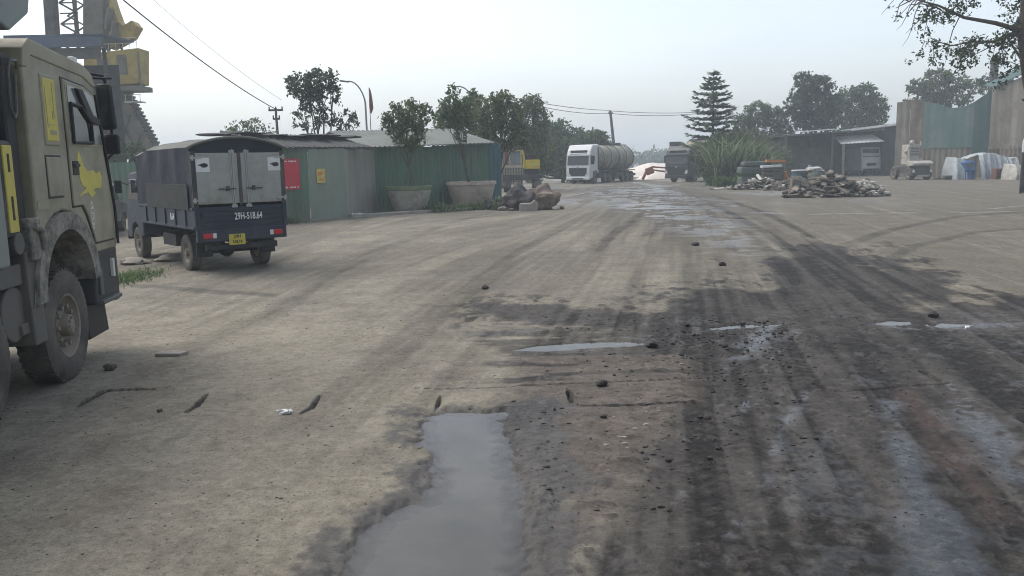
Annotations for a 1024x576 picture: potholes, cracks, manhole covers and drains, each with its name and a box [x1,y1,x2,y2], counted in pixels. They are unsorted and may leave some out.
pothole [309,404,547,576]
